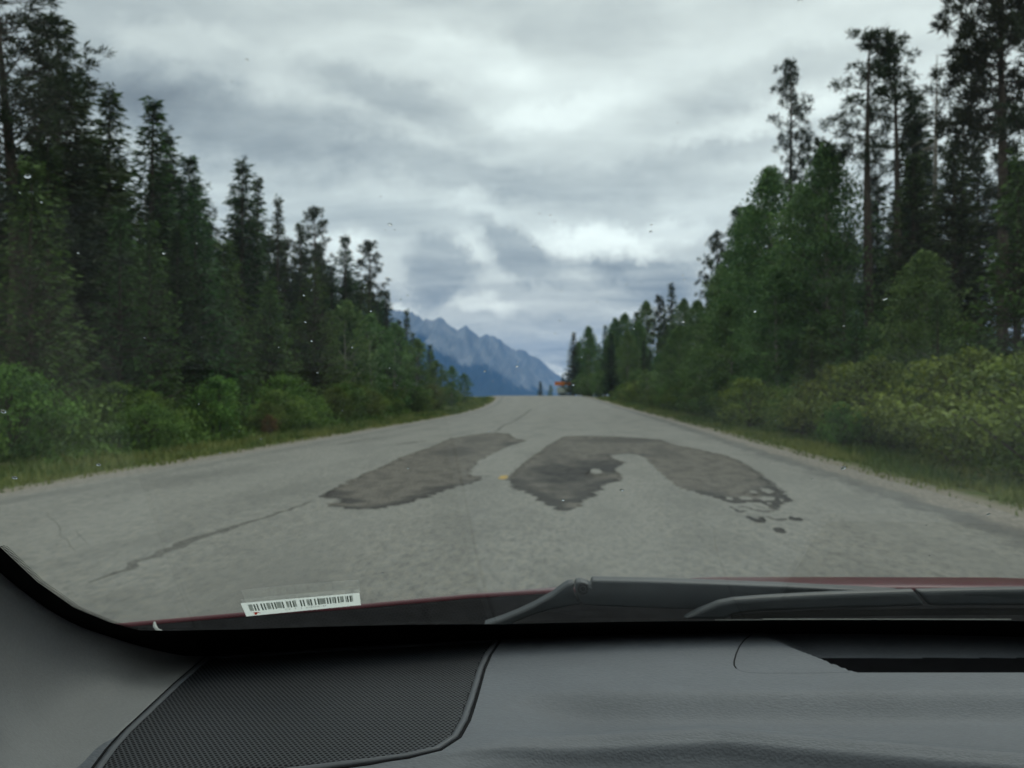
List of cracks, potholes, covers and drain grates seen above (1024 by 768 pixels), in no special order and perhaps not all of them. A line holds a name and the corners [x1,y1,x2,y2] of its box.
crack [47,501,313,583]
crack [494,409,530,432]
